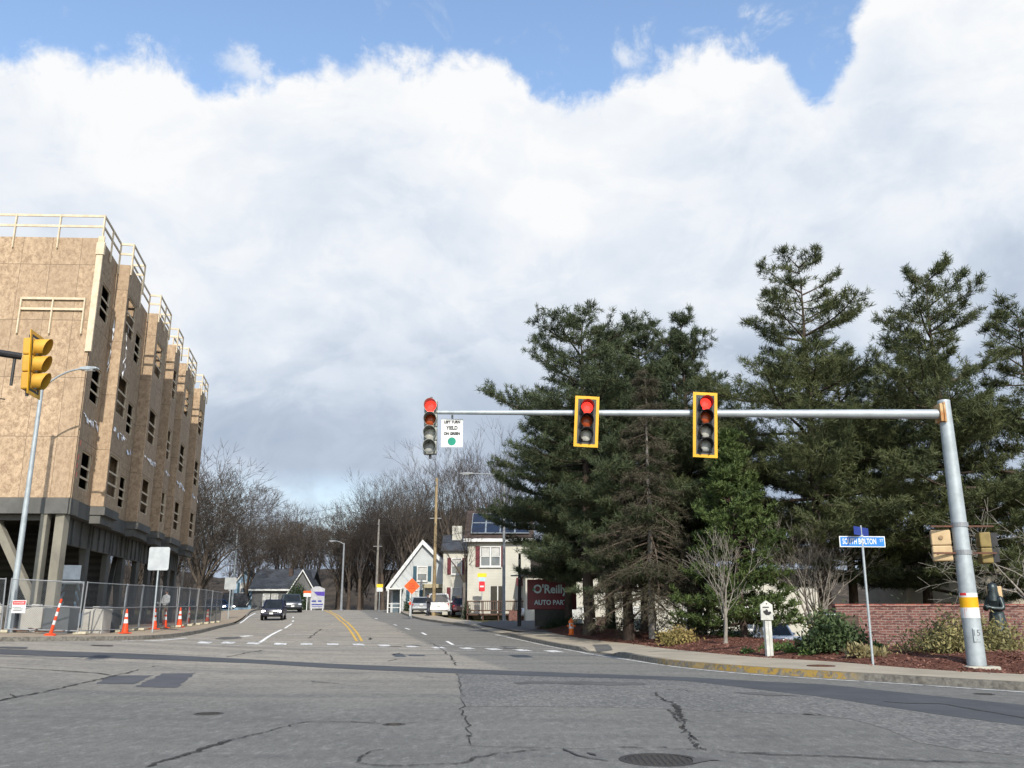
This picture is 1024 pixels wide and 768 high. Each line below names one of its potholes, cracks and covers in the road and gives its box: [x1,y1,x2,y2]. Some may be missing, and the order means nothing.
manhole cover [619,753,699,767]
crack [126,720,414,766]
crack [655,689,706,750]
crack [1,666,153,700]
crack [357,749,544,766]
